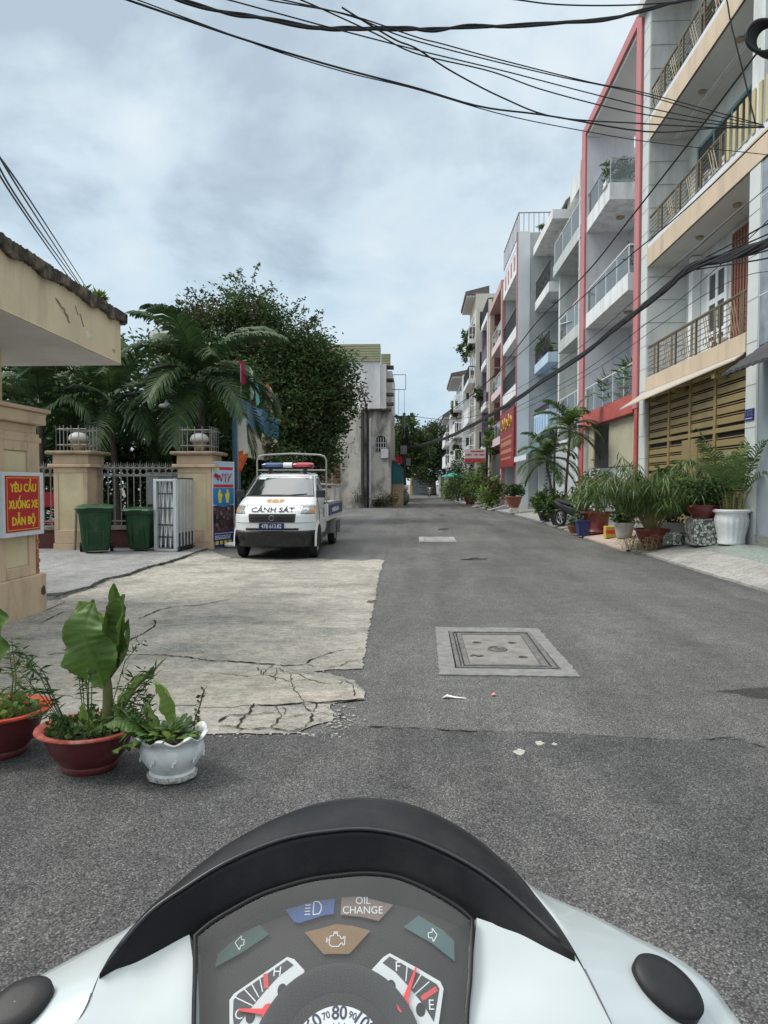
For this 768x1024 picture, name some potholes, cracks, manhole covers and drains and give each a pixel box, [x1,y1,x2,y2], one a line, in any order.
manhole cover [435,627,580,678]
crack [54,599,361,731]
